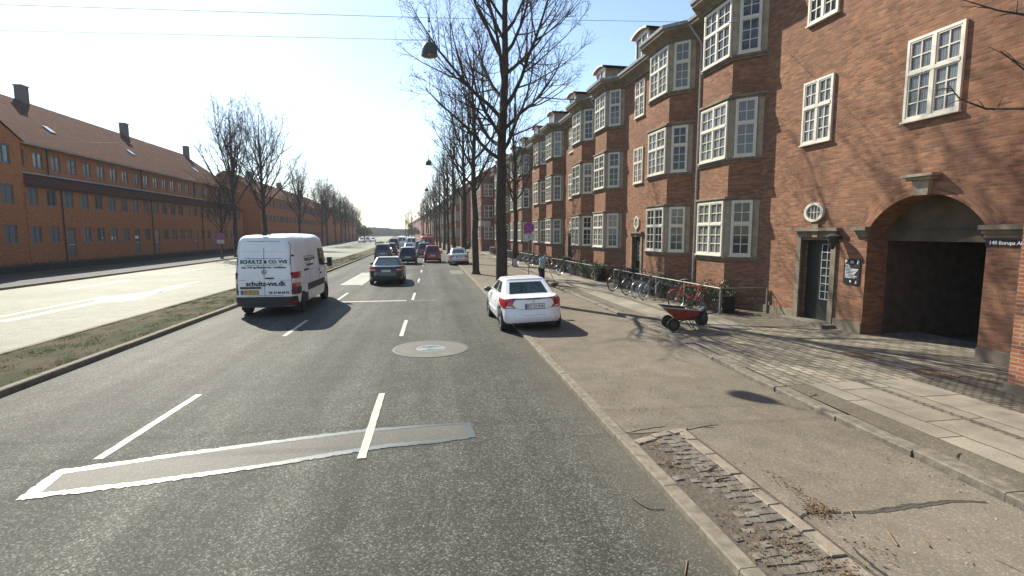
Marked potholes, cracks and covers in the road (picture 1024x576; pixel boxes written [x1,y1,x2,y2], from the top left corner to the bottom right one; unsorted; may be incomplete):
manhole cover [392,340,469,357]
